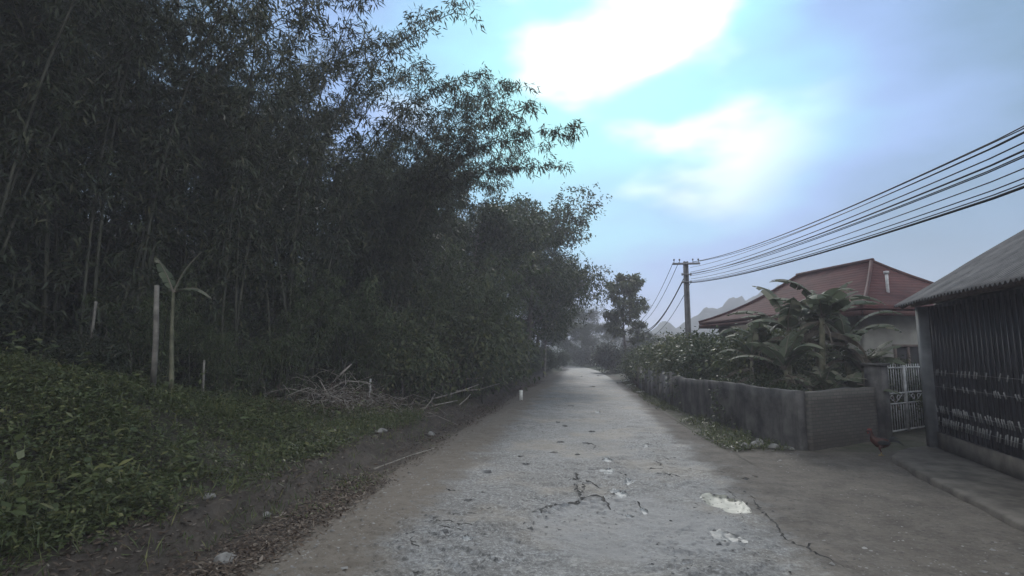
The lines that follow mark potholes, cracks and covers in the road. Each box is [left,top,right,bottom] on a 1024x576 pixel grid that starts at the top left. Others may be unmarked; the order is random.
crack [532,469,611,513]
crack [729,491,844,567]
pothole [710,529,748,543]
pothole [700,493,752,514]
